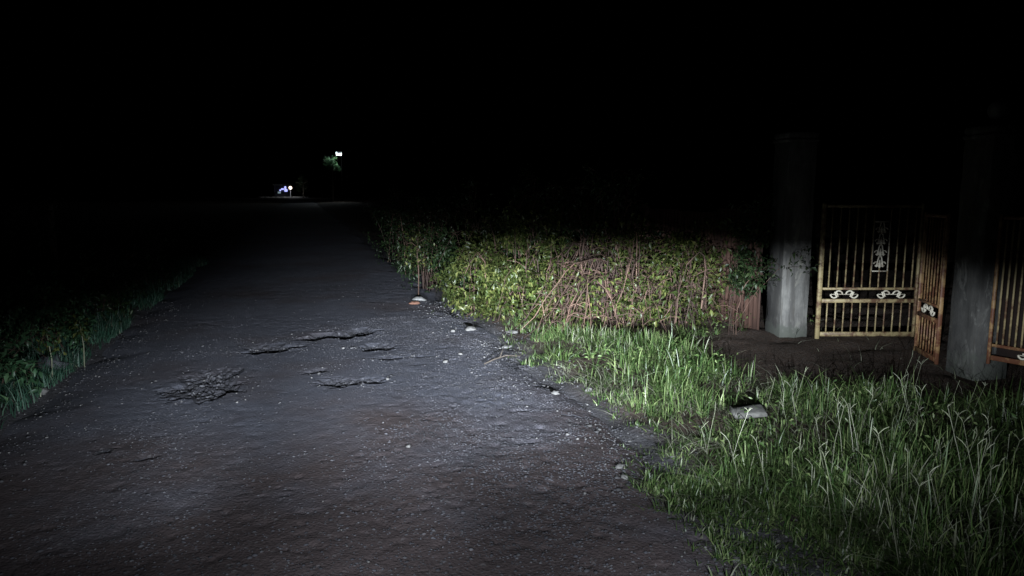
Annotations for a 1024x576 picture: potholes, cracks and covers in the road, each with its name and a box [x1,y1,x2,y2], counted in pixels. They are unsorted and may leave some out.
pothole [358,343,405,352]
pothole [312,376,390,389]
pothole [152,367,249,405]
pothole [237,342,310,355]
pothole [294,327,386,341]
